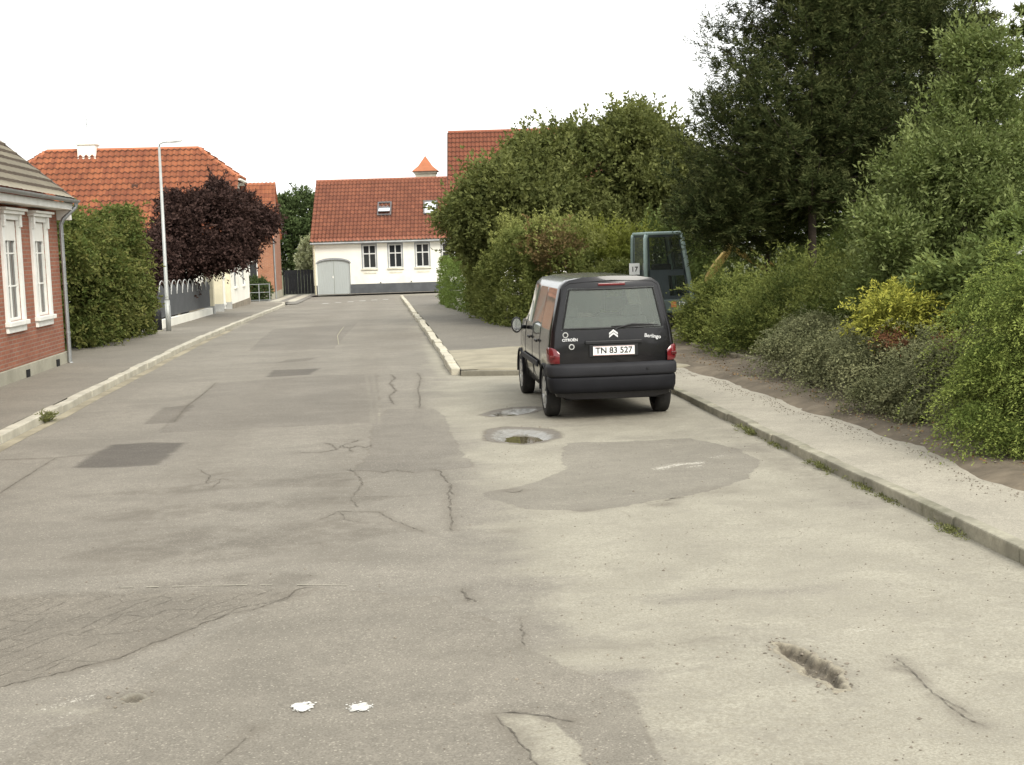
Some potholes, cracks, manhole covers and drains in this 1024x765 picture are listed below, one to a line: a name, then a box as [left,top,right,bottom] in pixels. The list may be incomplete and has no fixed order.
crack [497,711,571,765]
crack [432,469,454,529]
crack [320,468,422,531]
pothole [106,687,154,708]
crack [893,657,983,725]
pothole [483,426,561,444]
crack [0,587,305,686]
pothole [763,637,860,694]
pothole [482,406,543,417]
